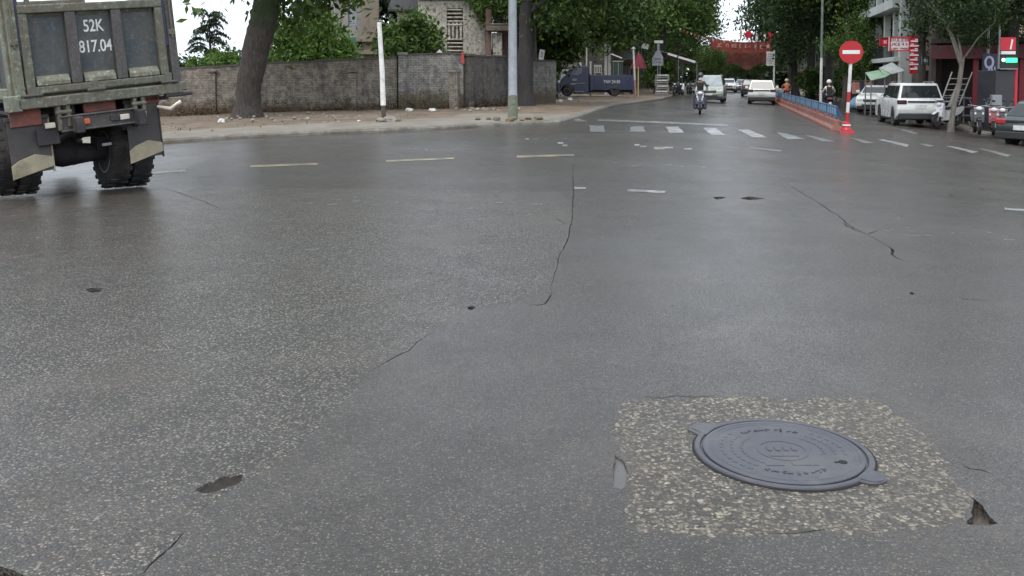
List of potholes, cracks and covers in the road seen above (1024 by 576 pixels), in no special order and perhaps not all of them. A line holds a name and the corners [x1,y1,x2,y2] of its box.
crack [781,180,904,261]
pothole [195,475,244,494]
pothole [967,496,998,526]
manhole cover [688,419,887,492]
crack [529,162,574,306]
crack [140,533,183,575]
